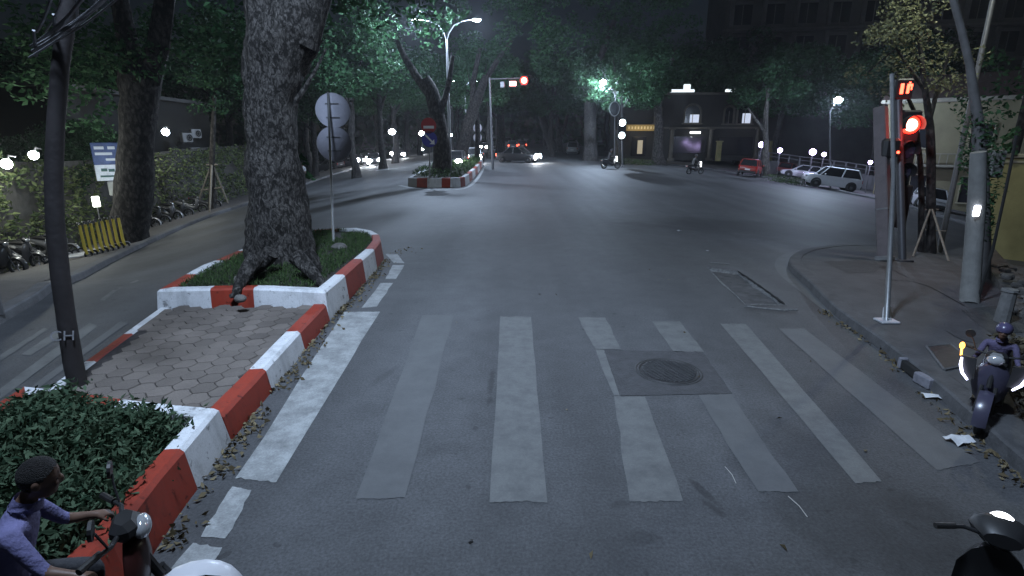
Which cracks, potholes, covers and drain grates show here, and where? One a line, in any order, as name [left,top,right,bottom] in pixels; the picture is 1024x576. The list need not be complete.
manhole cover [925,343,966,371]
manhole cover [635,358,703,386]
